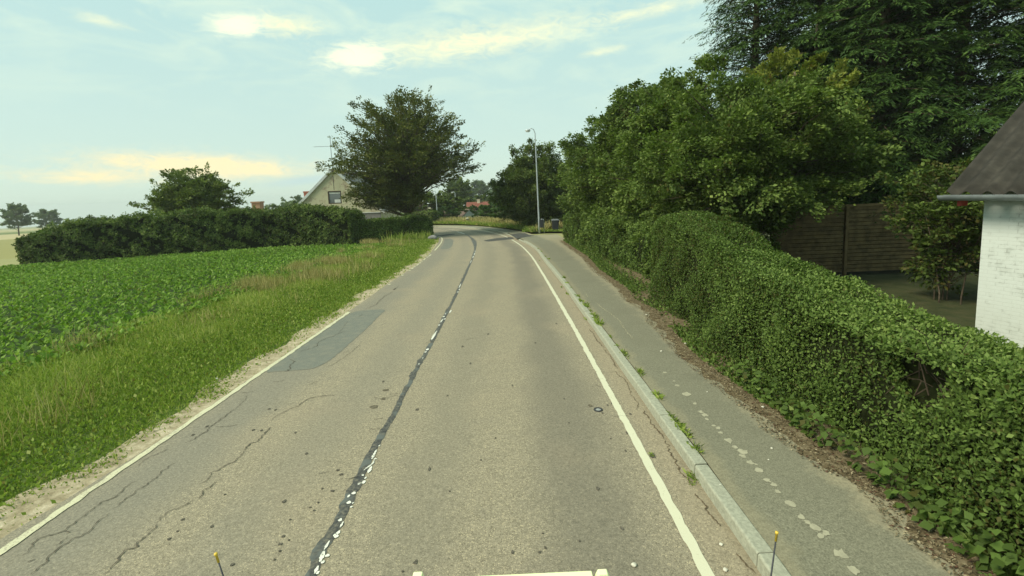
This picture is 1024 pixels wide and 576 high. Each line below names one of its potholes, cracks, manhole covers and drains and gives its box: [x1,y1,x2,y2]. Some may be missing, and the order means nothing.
crack [105,347,357,573]
crack [615,371,690,483]
crack [23,450,174,574]
